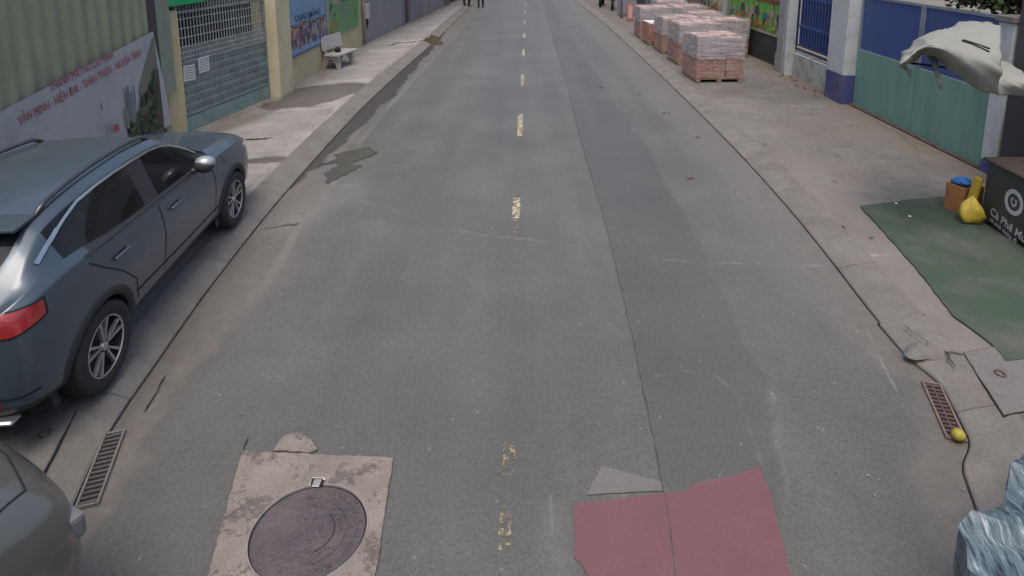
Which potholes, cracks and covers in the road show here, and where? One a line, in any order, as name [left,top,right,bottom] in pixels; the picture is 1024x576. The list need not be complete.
crack [144,375,166,412]
manhole cover [208,450,394,576]
drain grate [75,429,126,510]
drain grate [921,380,968,443]
